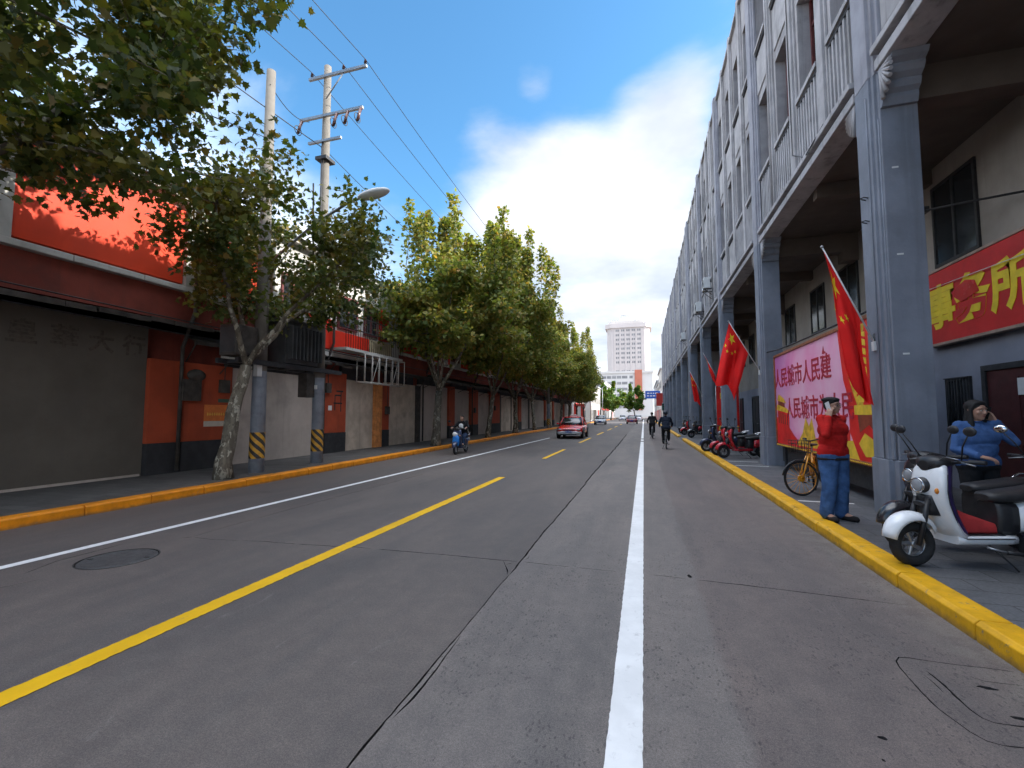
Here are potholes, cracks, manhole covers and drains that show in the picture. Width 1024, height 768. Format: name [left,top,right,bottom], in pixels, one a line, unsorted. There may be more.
crack [896,657,1024,748]
manhole cover [72,548,161,570]
